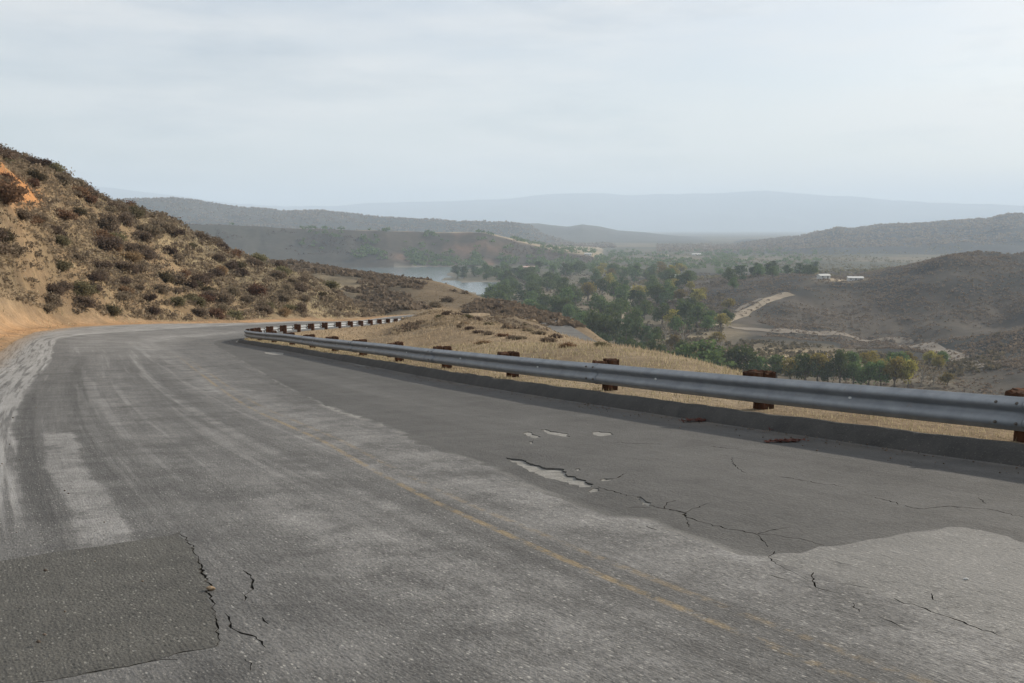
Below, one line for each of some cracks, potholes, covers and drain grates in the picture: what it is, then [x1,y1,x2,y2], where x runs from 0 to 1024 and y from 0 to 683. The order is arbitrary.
pothole [505,457,593,487]
crack [34,531,268,683]
crack [878,593,1022,643]
crack [599,473,872,612]
